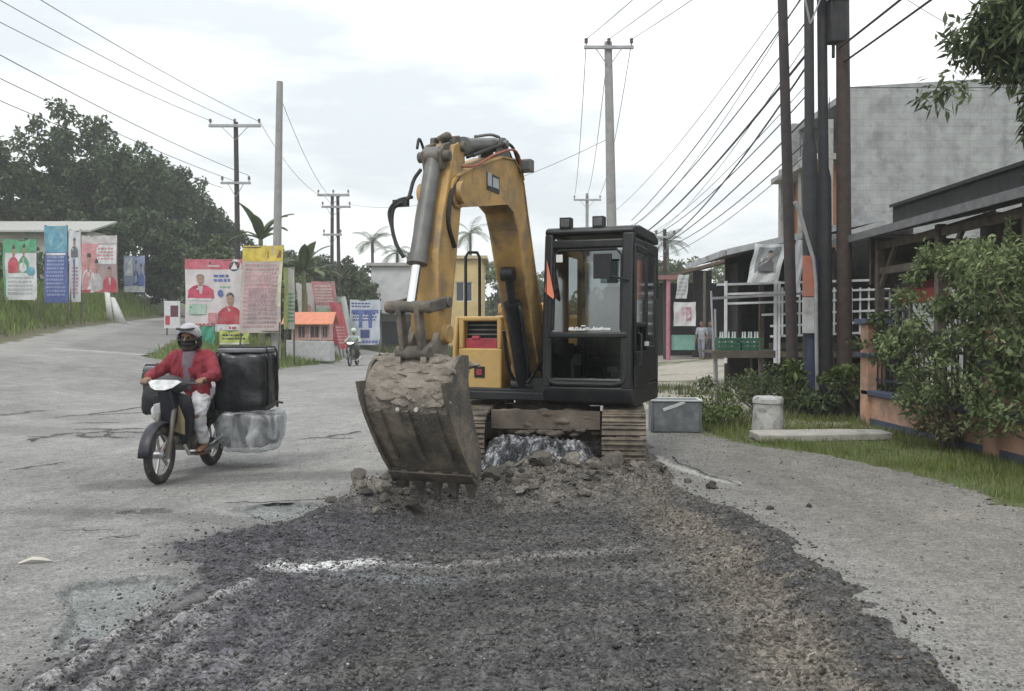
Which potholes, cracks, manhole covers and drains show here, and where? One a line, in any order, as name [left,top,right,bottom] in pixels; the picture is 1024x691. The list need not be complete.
crack [669,456,742,485]
crack [0,407,144,442]
pothole [228,502,322,521]
crack [302,431,362,440]
crack [9,462,66,471]
